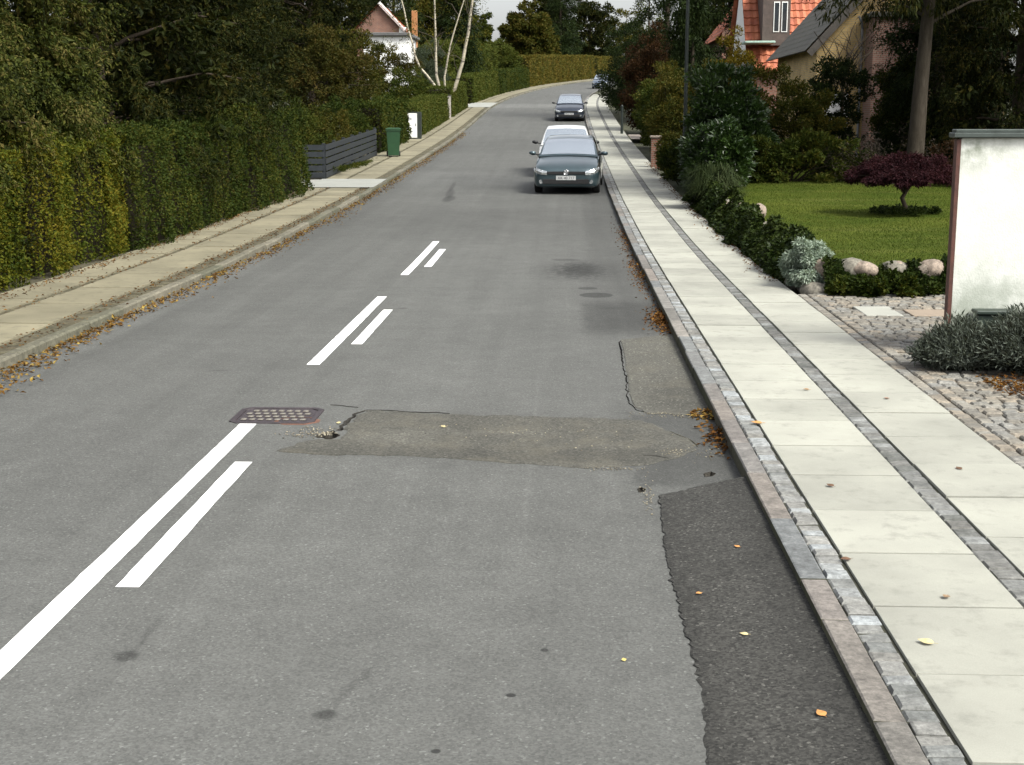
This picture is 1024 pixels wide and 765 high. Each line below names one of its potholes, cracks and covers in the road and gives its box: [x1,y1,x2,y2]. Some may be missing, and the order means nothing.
manhole cover [229,407,324,425]
